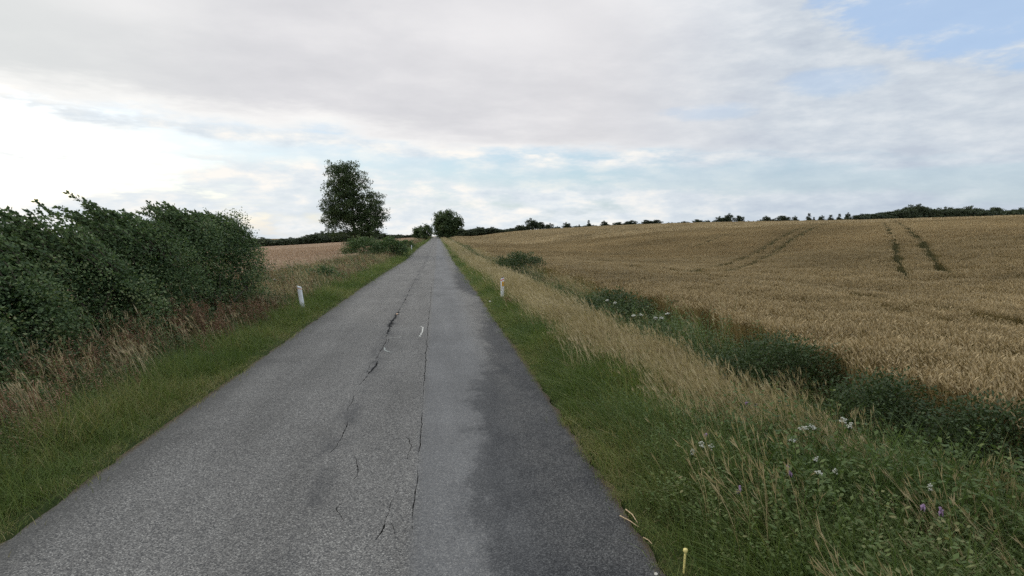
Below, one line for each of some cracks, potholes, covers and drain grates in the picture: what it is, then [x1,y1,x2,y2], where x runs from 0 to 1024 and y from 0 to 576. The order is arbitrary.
crack [331,377,367,521]
